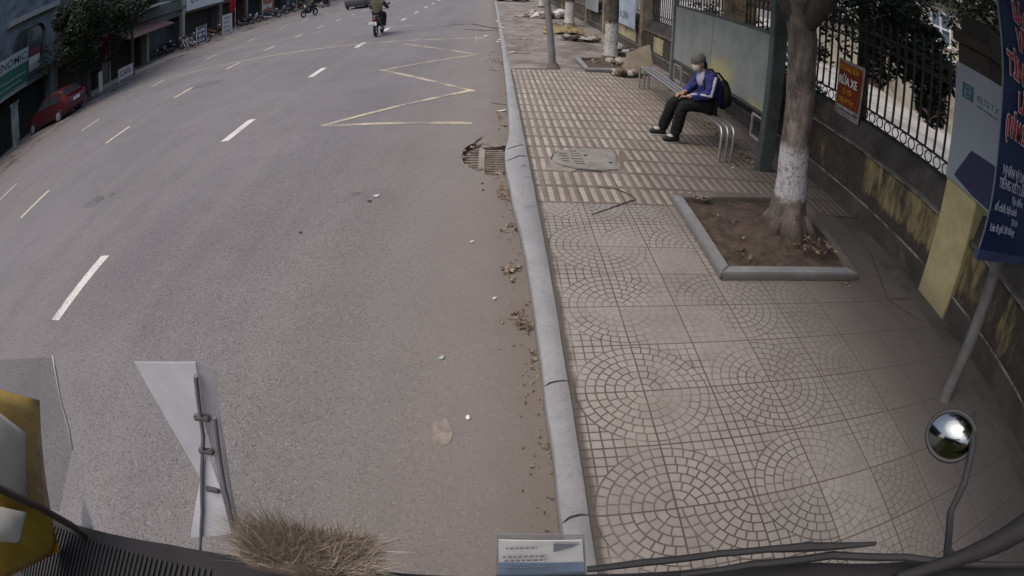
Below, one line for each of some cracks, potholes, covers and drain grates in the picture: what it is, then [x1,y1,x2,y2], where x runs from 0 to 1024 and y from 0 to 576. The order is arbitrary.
manhole cover [547,148,625,172]
crack [592,187,637,215]
drain grate [459,142,506,178]
